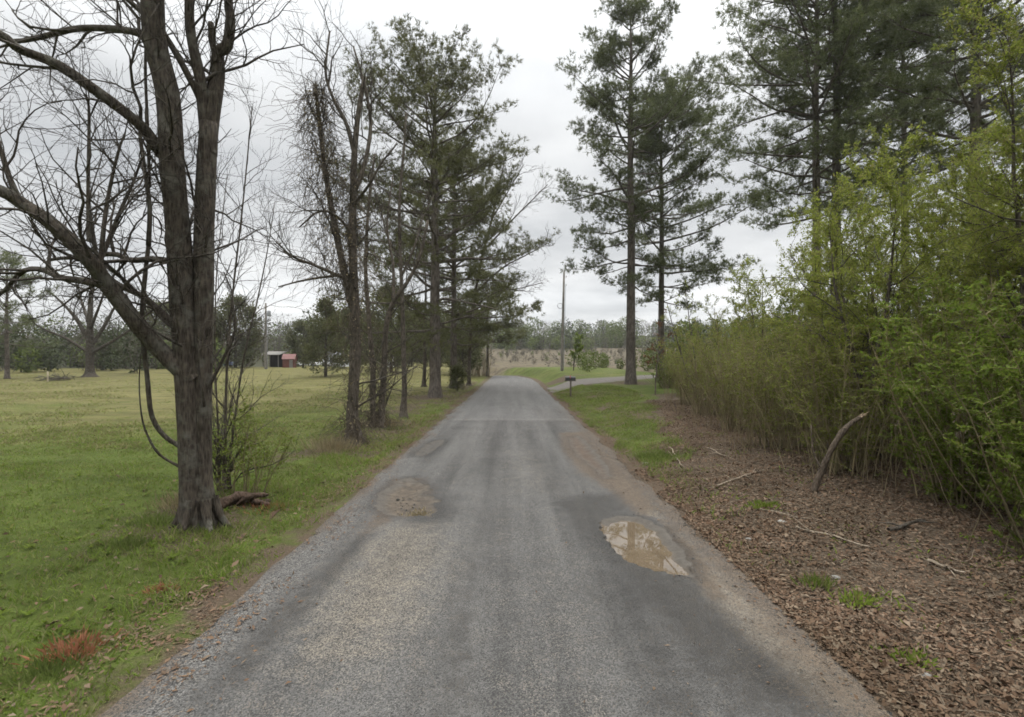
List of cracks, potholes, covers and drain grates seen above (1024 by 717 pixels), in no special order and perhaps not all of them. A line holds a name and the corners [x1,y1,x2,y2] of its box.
pothole [588,512,707,583]
pothole [372,477,442,520]
